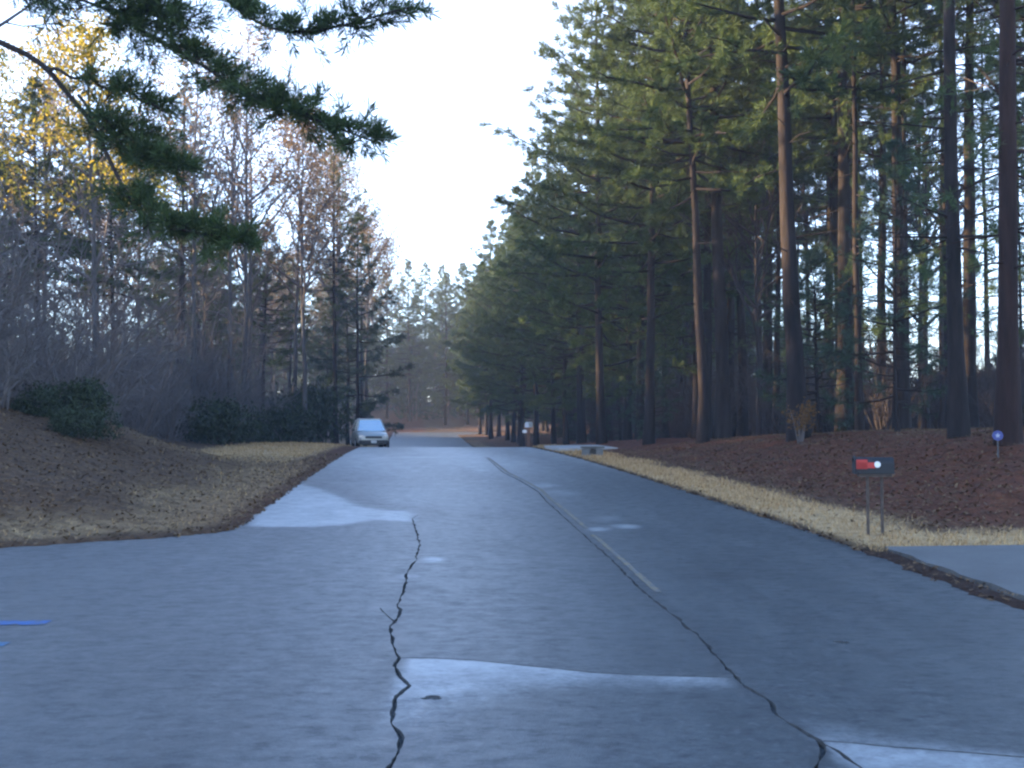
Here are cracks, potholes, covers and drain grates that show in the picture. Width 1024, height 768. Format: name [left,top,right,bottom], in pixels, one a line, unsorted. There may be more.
crack [380,516,421,768]
crack [436,460,1024,768]
